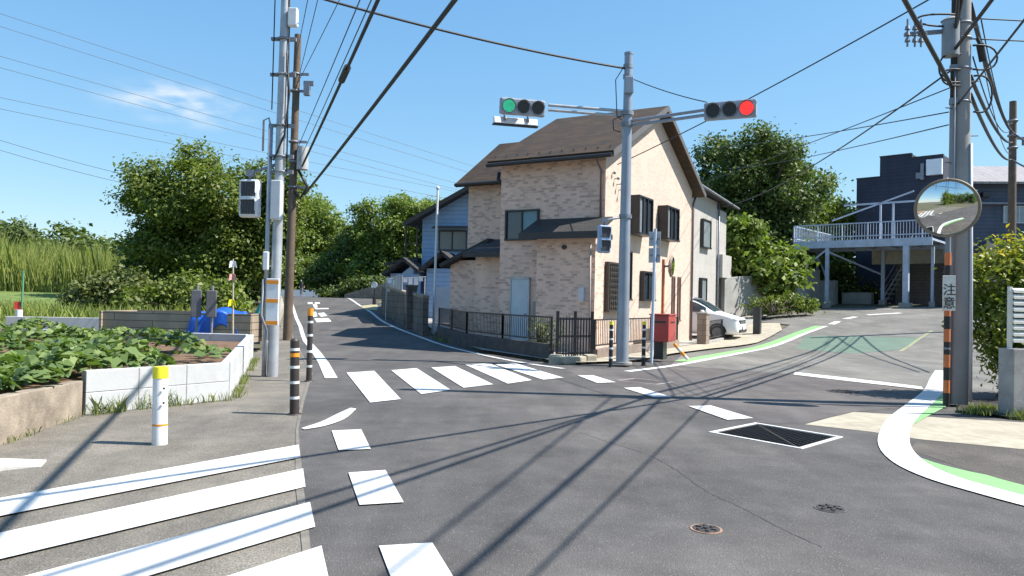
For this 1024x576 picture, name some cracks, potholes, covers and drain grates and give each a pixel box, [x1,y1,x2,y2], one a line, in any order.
manhole cover [813,504,848,513]
manhole cover [690,524,723,534]
crack [580,432,822,547]
